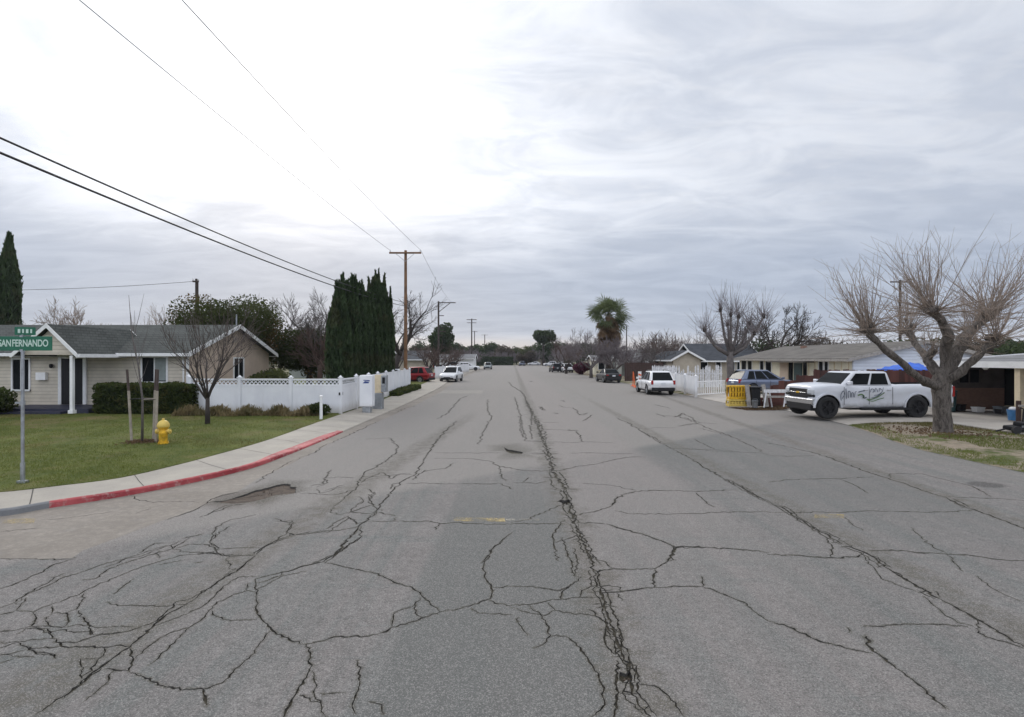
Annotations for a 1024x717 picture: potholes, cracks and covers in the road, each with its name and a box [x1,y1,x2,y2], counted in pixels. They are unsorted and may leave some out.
pothole [214,484,297,504]
crack [0,426,512,717]
